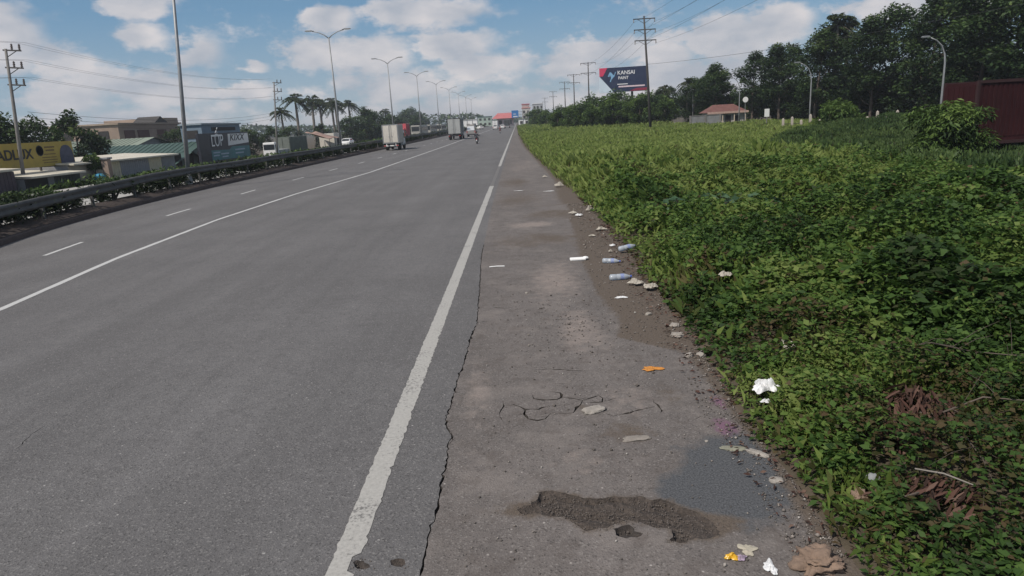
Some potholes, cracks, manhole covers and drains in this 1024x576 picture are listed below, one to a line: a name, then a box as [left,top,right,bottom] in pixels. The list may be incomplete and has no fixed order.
pothole [517,489,724,545]
crack [499,369,663,421]
pothole [351,559,375,571]
crack [420,245,516,576]
pothole [389,555,409,569]
